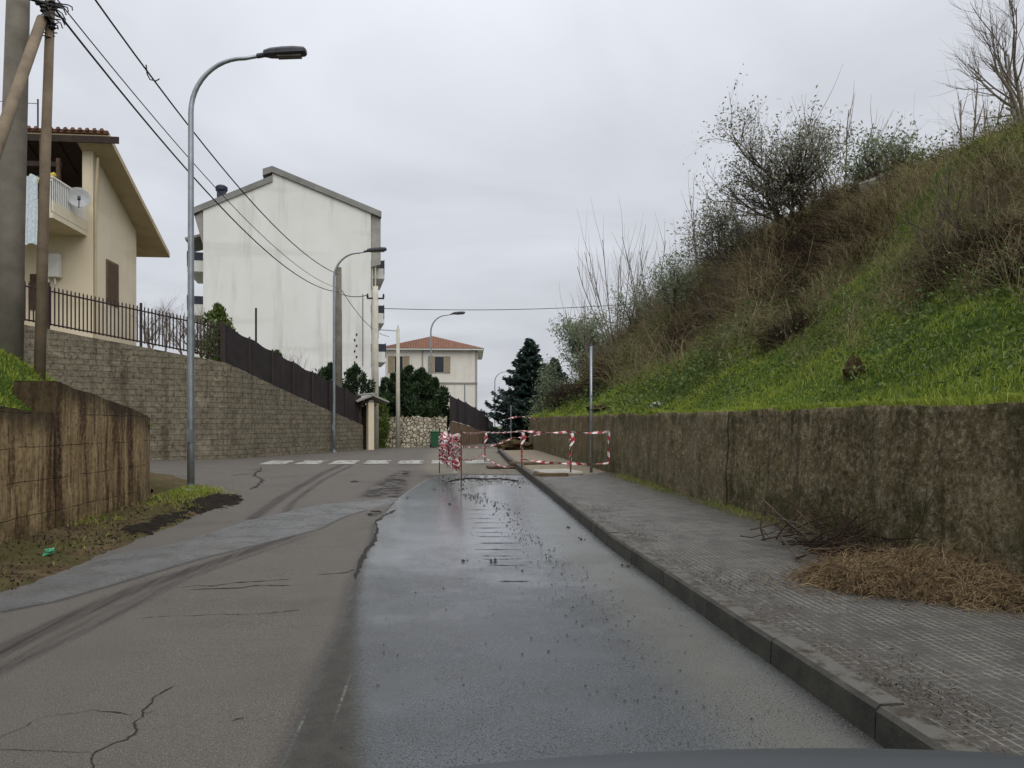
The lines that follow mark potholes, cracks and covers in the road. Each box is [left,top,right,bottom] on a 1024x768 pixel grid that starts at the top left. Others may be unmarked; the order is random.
crack [2,686,173,768]
crack [185,579,287,590]
crack [231,467,265,490]
